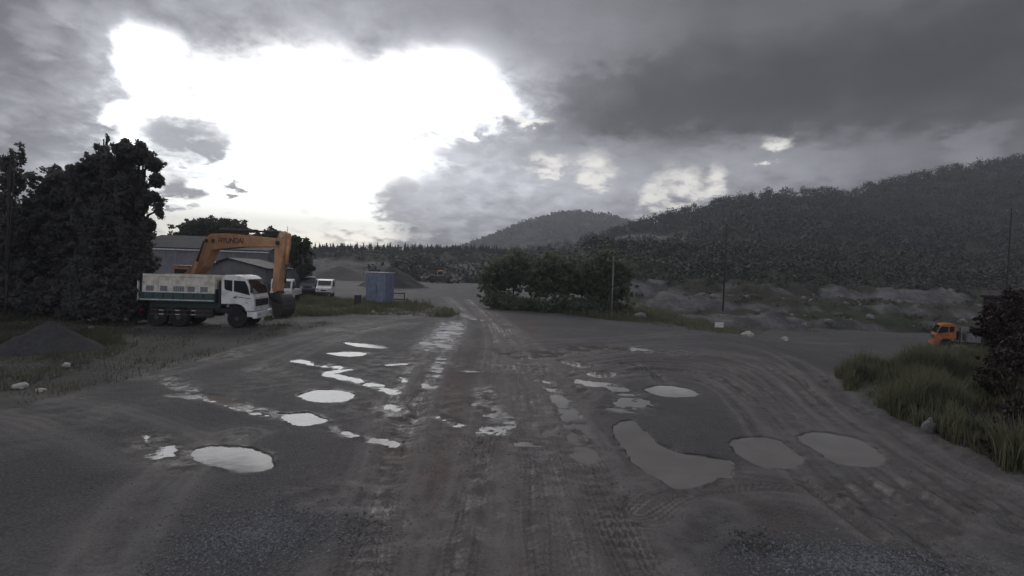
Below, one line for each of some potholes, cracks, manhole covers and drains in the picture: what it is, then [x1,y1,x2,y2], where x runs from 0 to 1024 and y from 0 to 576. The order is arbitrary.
pothole [173,440,289,476]
pothole [781,427,908,474]
pothole [627,382,717,401]
pothole [713,432,824,476]
pothole [281,386,371,407]
pothole [265,408,344,431]
pothole [603,416,754,497]
